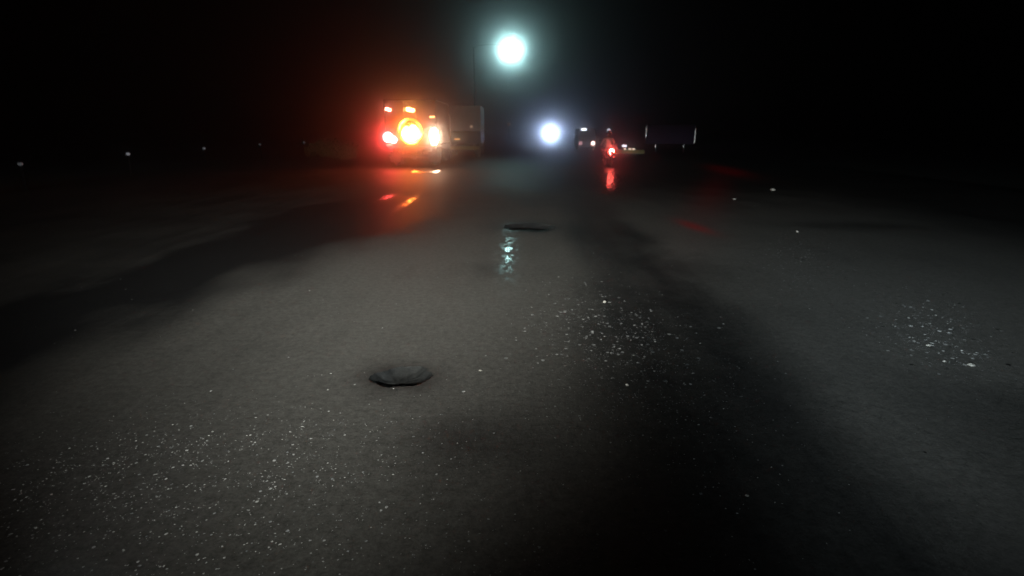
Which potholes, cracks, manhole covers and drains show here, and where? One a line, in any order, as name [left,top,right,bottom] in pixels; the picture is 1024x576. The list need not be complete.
pothole [368,366,434,388]
pothole [504,222,556,232]
